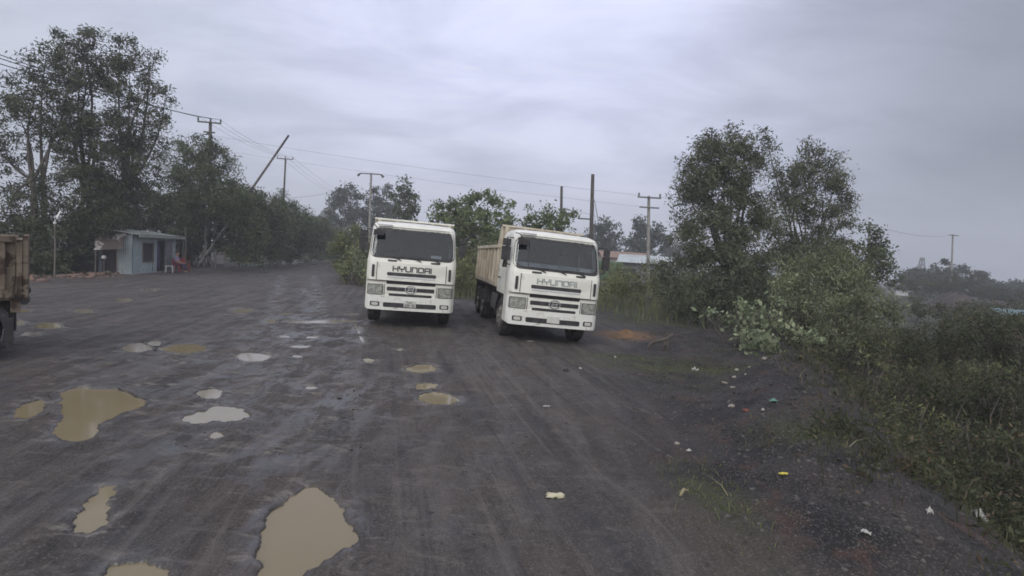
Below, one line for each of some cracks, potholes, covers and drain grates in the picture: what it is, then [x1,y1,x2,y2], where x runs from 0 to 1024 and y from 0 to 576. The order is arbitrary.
pothole [224,351,282,364]
pothole [36,475,145,547]
pothole [223,478,383,576]
pothole [107,342,155,354]
pothole [67,543,210,576]
pothole [162,402,267,428]
pothole [28,383,165,448]
pothole [178,385,237,402]
pothole [394,361,447,376]
pothole [0,397,52,423]
pothole [22,321,76,330]
pothole [155,342,218,355]
